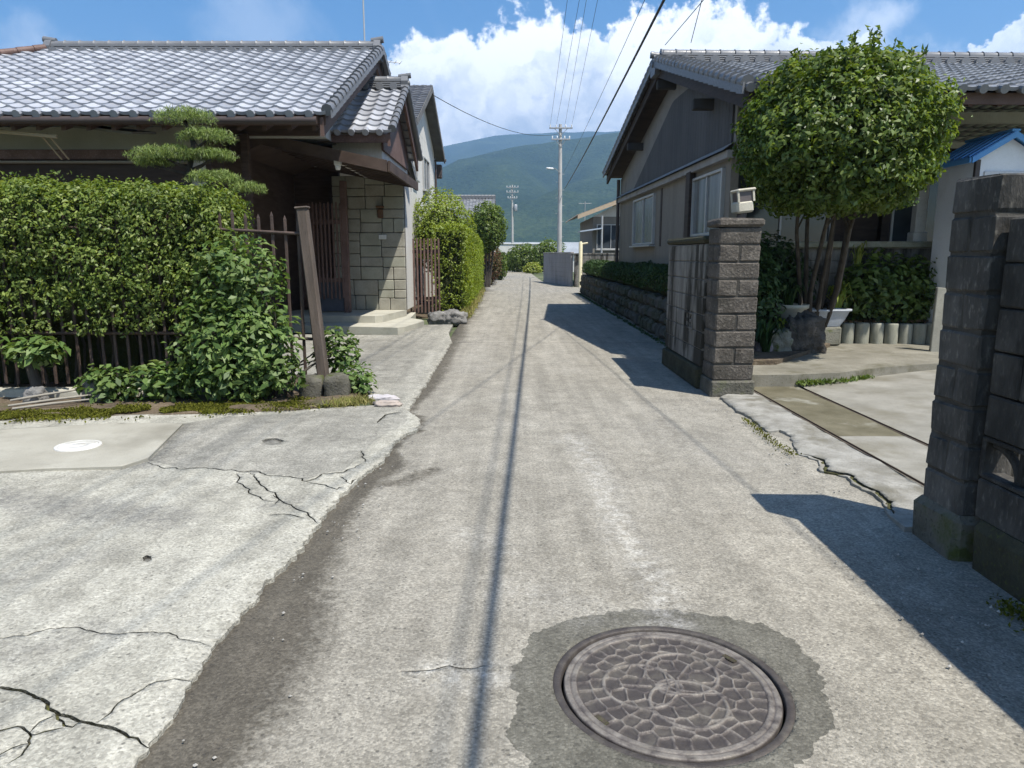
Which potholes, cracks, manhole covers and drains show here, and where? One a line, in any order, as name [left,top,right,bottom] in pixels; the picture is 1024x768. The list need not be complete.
crack [148,451,365,523]
crack [805,454,894,514]
manhole cover [553,626,796,768]
crack [0,679,192,764]
crack [17,627,197,642]
